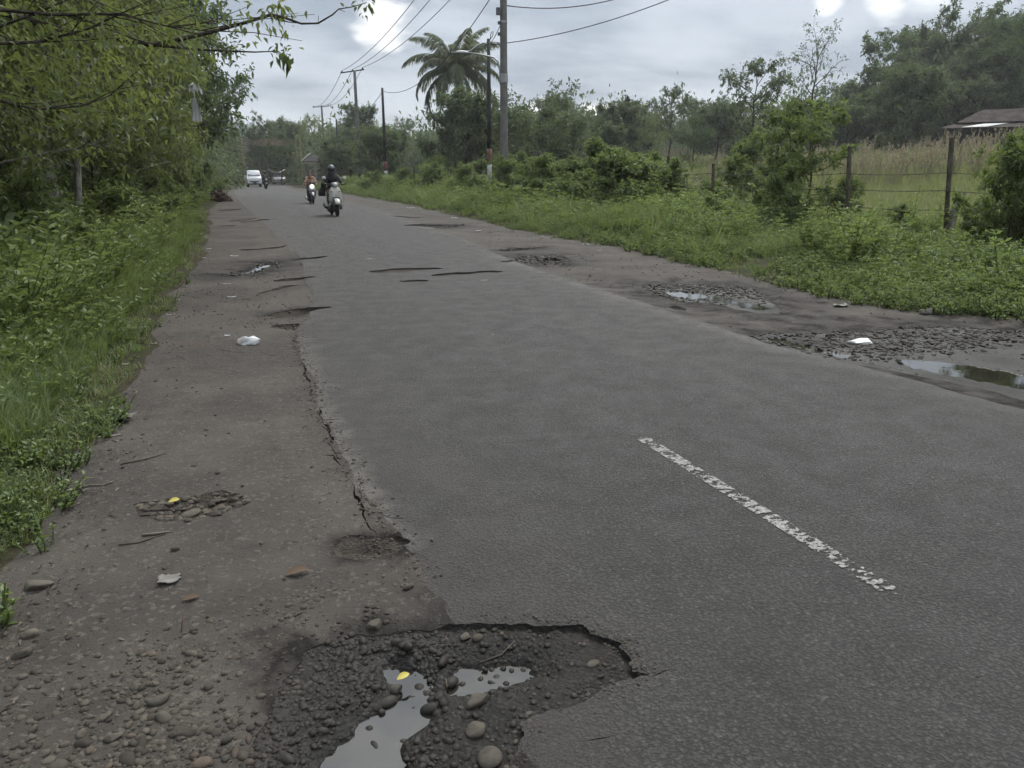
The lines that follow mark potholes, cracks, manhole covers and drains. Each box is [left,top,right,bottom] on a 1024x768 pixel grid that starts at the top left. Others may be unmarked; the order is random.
pothole [267,307,330,318]
pothole [641,284,782,314]
crack [294,346,392,532]
pothole [132,490,248,522]
pothole [752,327,1024,400]
pothole [333,535,411,561]
pothole [252,623,649,768]
